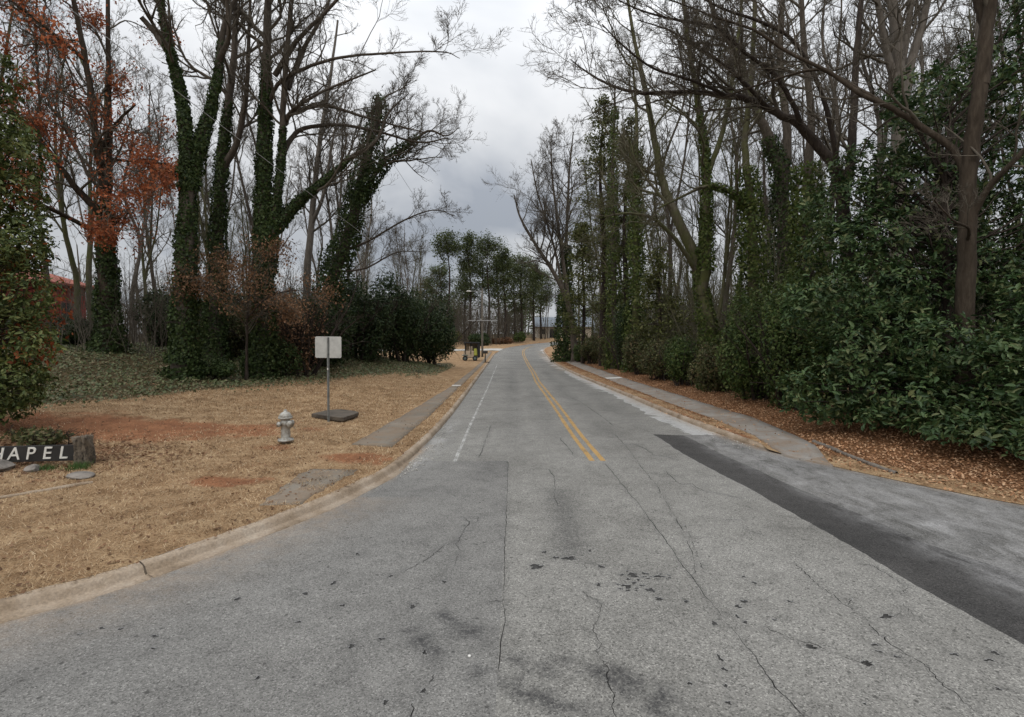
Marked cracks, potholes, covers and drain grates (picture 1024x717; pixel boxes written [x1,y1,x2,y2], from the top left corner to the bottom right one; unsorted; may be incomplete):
crack [796,565,974,711]
crack [768,628,886,674]
crack [572,398,804,717]
